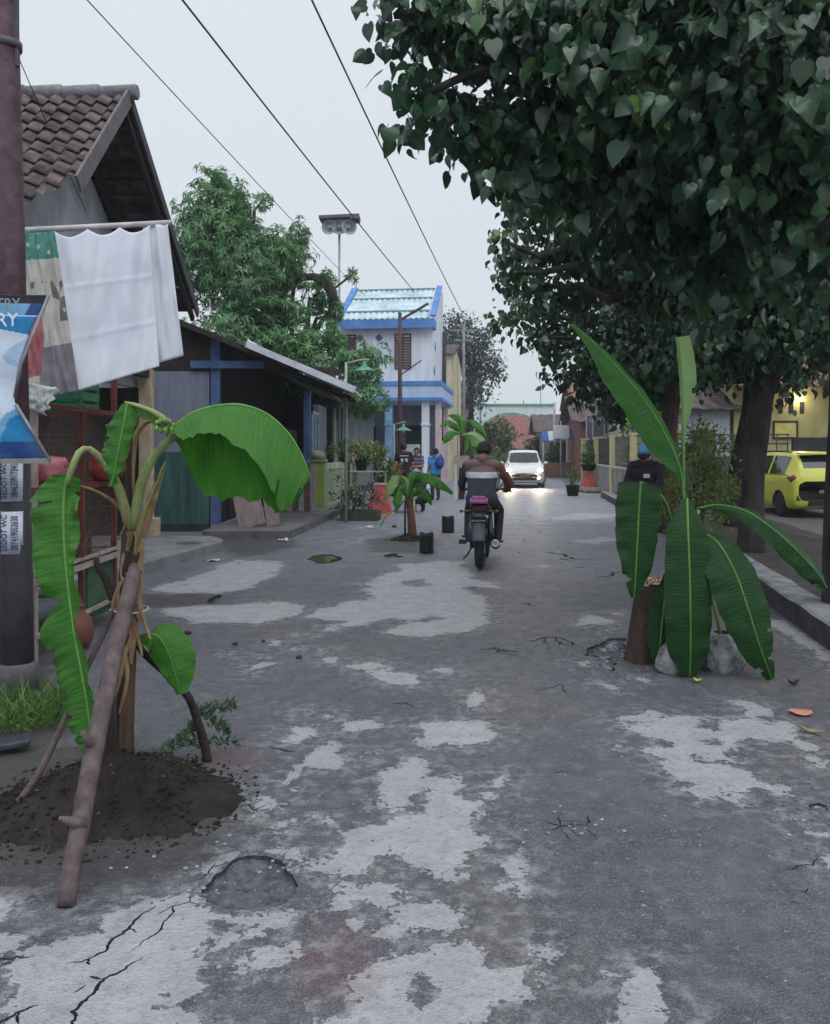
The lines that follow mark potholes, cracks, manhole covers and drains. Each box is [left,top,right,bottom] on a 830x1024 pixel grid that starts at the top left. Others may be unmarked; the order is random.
crack [547,552,616,577]
pothole [308,554,342,564]
pothole [584,638,627,672]
pothole [201,855,298,910]
crack [480,637,579,656]
crack [0,864,225,1024]
crack [540,816,597,841]
